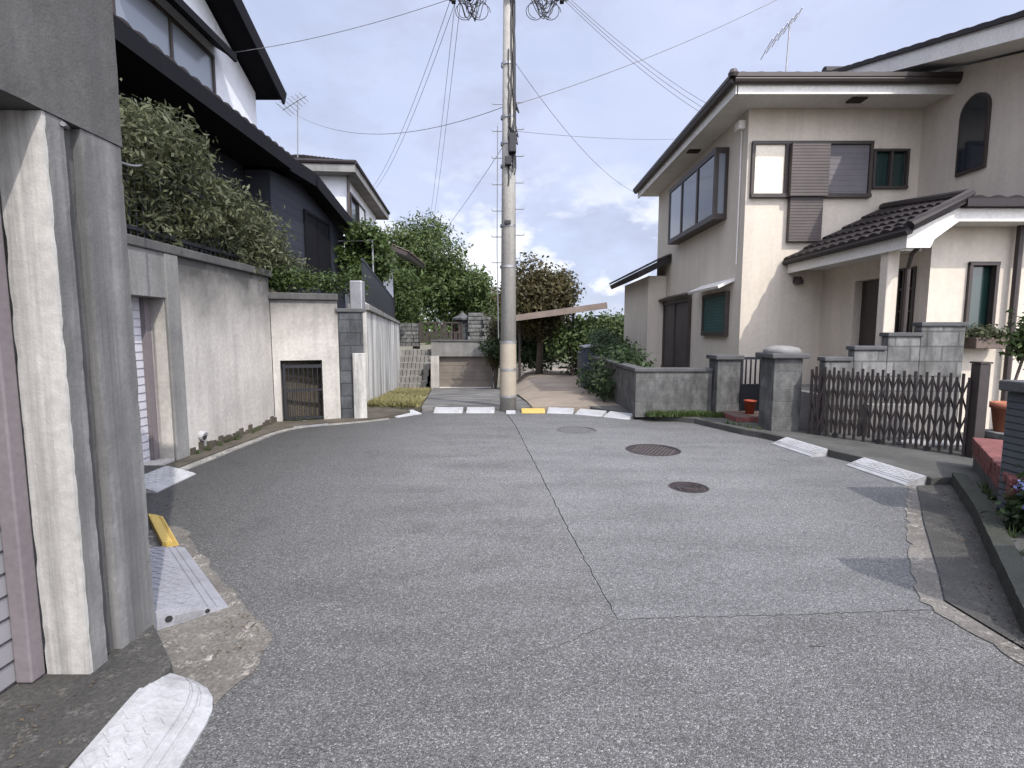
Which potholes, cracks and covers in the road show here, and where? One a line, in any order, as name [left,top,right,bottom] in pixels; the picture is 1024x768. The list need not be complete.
crack [495,412,934,667]
manhole cover [668,481,709,493]
manhole cover [625,444,681,456]
manhole cover [556,426,597,434]
